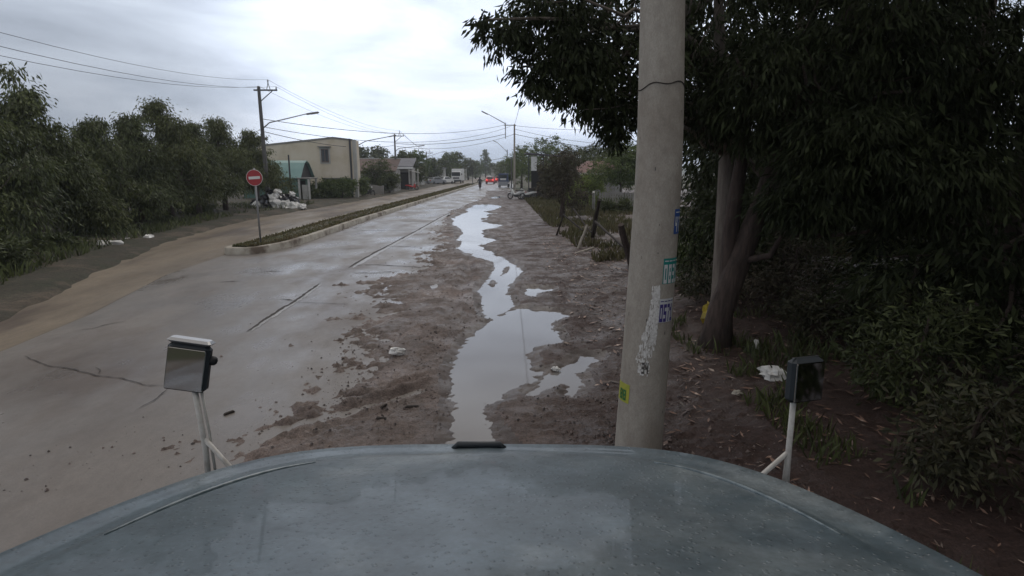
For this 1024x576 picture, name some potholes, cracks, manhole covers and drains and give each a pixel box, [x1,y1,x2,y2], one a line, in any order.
crack [28,357,167,410]
